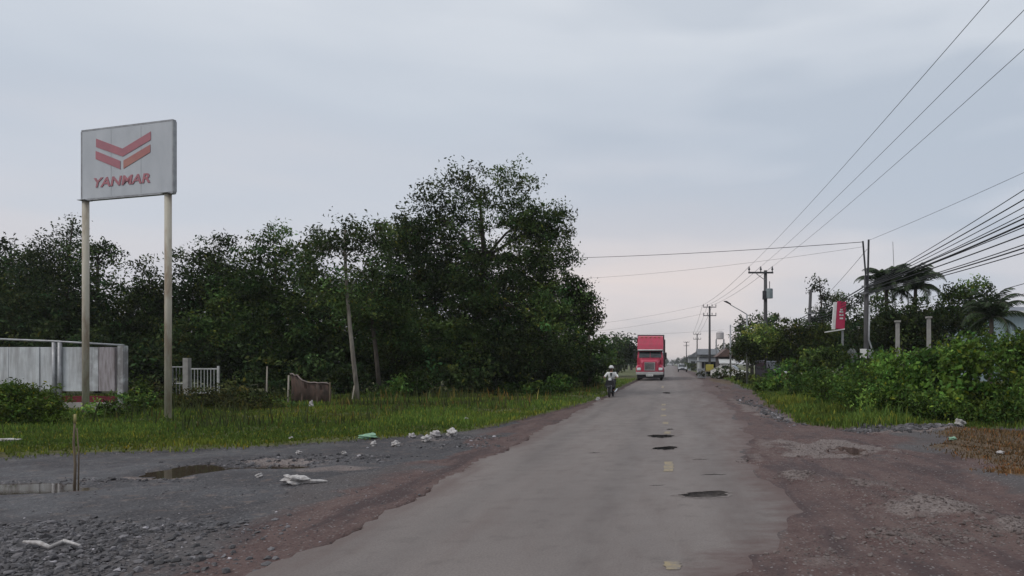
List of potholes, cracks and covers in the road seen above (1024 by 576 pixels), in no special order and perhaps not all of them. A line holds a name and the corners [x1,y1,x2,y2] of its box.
pothole [670,490,733,499]
pothole [826,447,869,456]
